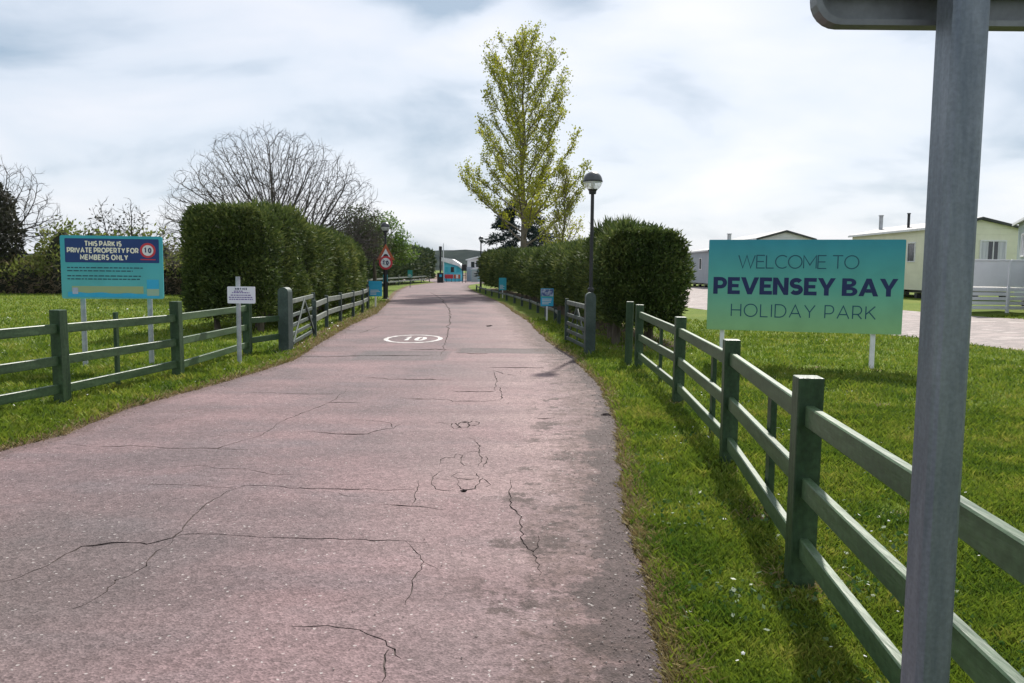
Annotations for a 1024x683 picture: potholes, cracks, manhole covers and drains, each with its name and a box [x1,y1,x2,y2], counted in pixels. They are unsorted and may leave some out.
crack [438,367,528,402]
crack [81,391,353,449]
crack [290,625,401,682]
crack [3,466,436,608]
crack [508,481,542,575]
crack [396,421,490,510]
